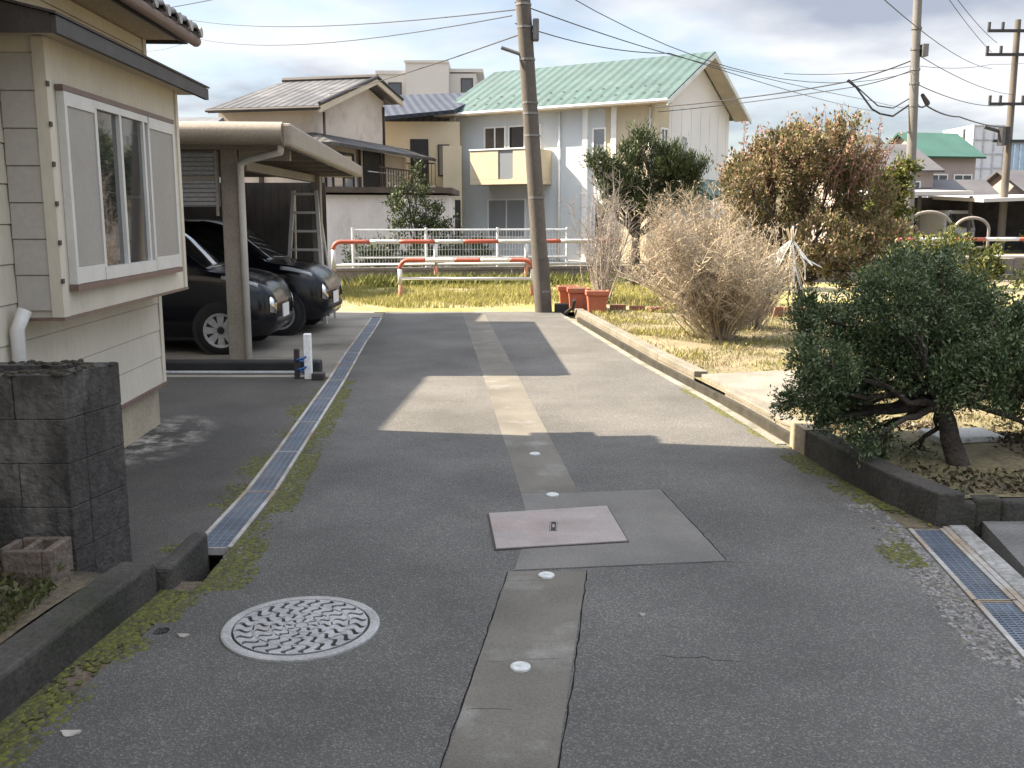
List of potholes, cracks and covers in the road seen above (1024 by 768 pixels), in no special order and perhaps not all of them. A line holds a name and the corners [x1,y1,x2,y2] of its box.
drain grate [354,332,373,341]
utility cover [487,506,629,551]
drain grate [245,451,302,492]
drain grate [346,341,367,352]
drain grate [314,379,346,398]
drain grate [328,364,354,380]
drain grate [973,600,1024,659]
drain grate [276,421,320,451]
drain grate [908,528,1016,603]
manhole cover [221,596,380,663]
drain grate [205,491,276,555]
drain grate [338,352,361,365]
